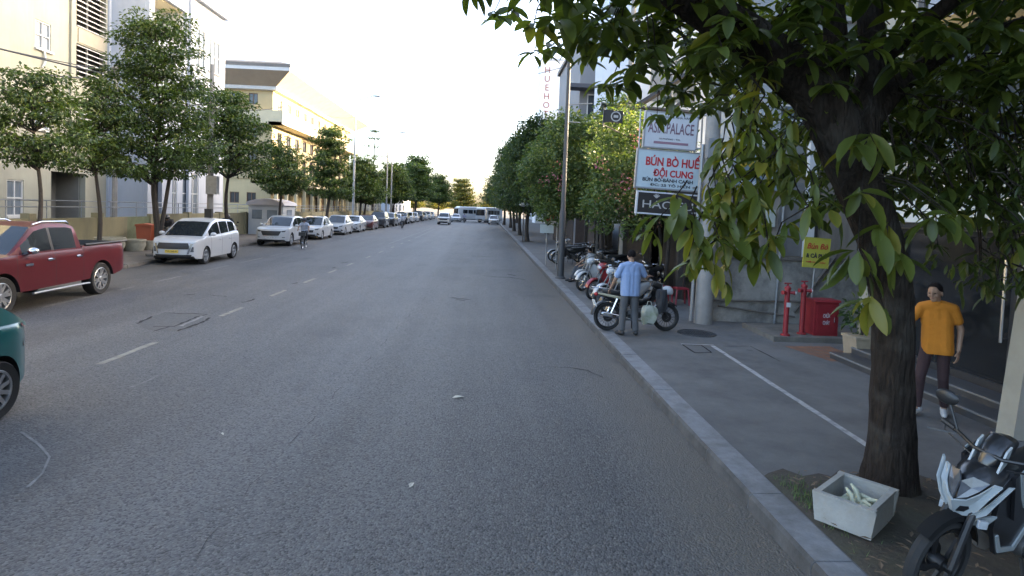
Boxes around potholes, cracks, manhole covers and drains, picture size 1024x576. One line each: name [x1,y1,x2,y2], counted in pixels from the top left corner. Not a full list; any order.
utility cover [682,344,712,353]
manhole cover [677,329,717,337]
